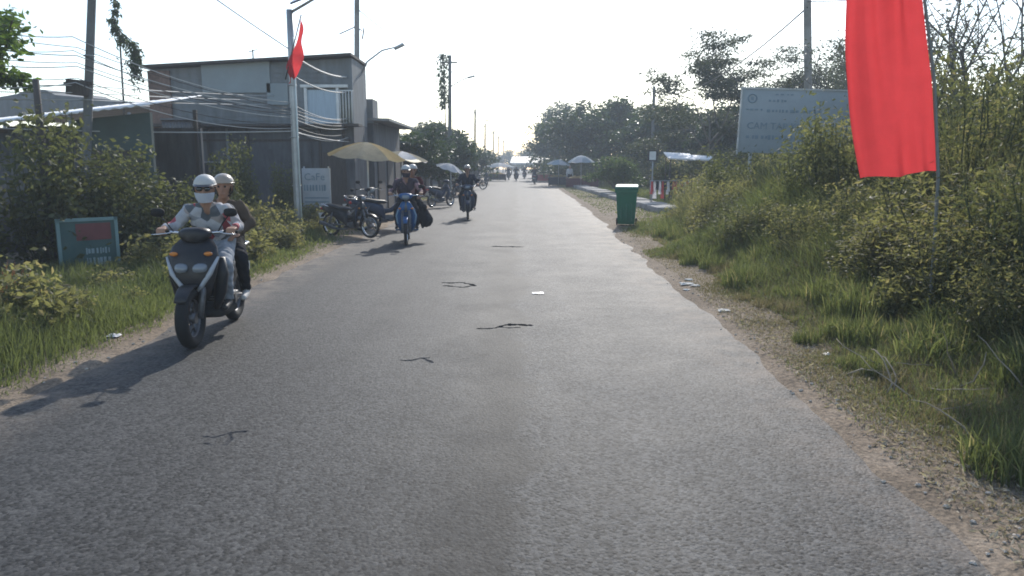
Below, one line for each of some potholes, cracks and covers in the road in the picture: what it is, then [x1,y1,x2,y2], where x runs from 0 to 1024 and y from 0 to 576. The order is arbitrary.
crack [202,431,247,446]
